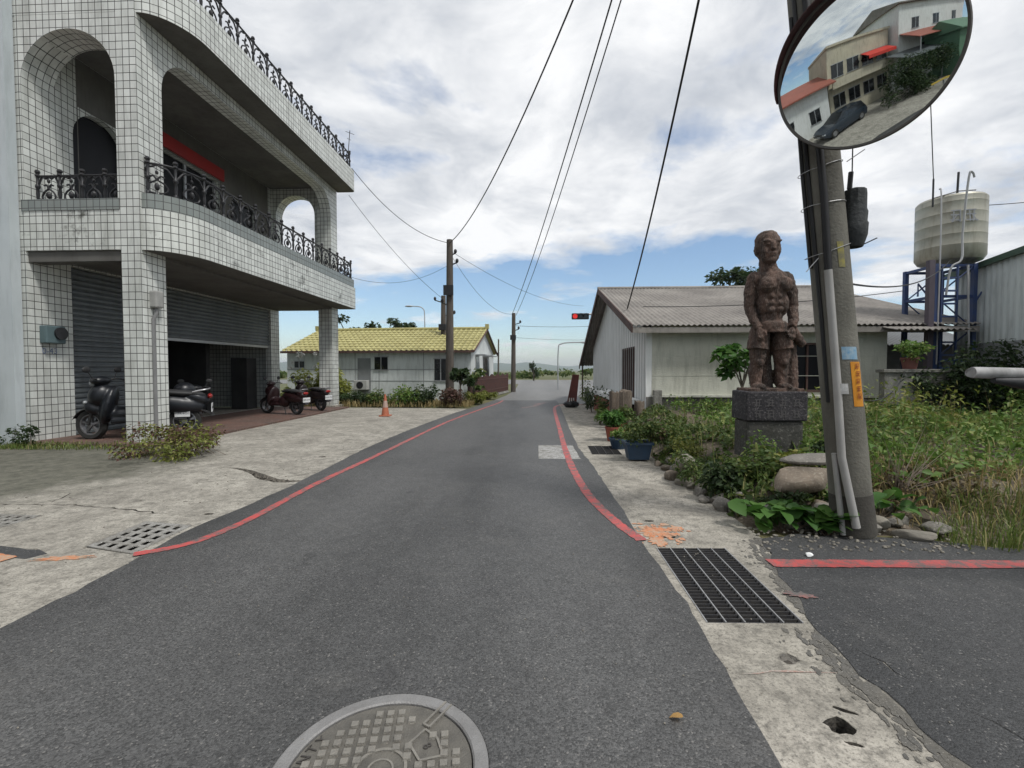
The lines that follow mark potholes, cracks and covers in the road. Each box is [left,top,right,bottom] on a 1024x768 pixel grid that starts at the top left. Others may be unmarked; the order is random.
drain grate [656,547,804,623]
drain grate [587,445,622,455]
manhole cover [272,694,489,768]
crack [227,467,301,483]
pothole [822,716,857,735]
crack [3,493,159,514]
